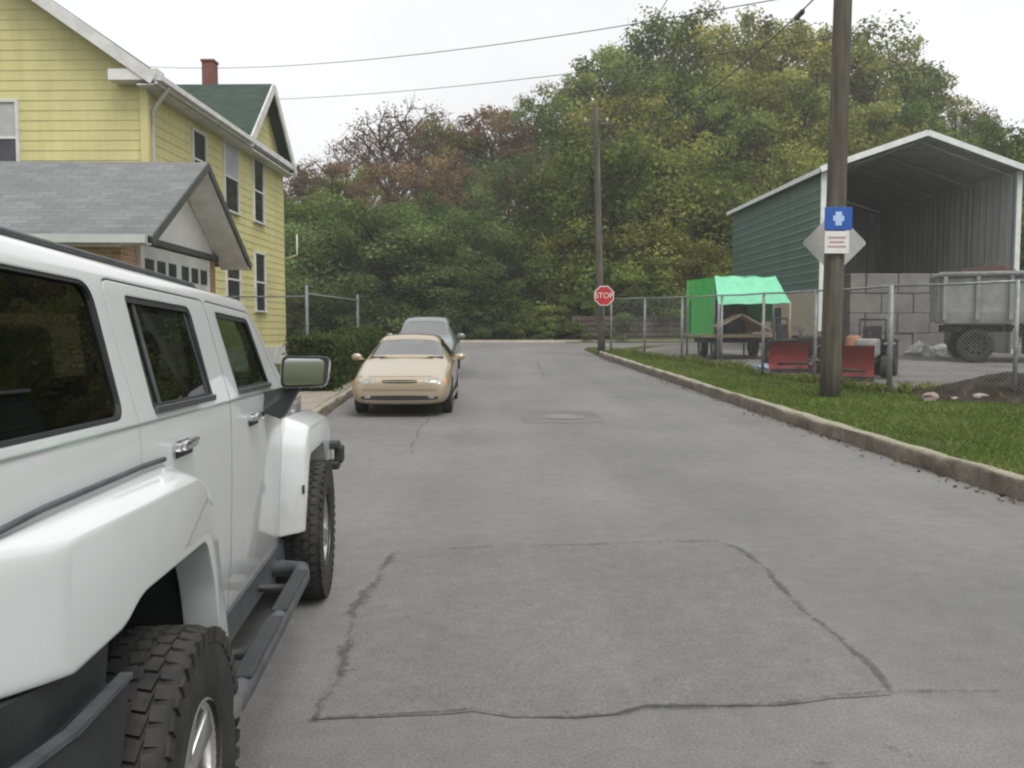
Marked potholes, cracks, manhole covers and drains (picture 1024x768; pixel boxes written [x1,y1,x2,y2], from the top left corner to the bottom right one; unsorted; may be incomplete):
manhole cover [521,411,604,423]
